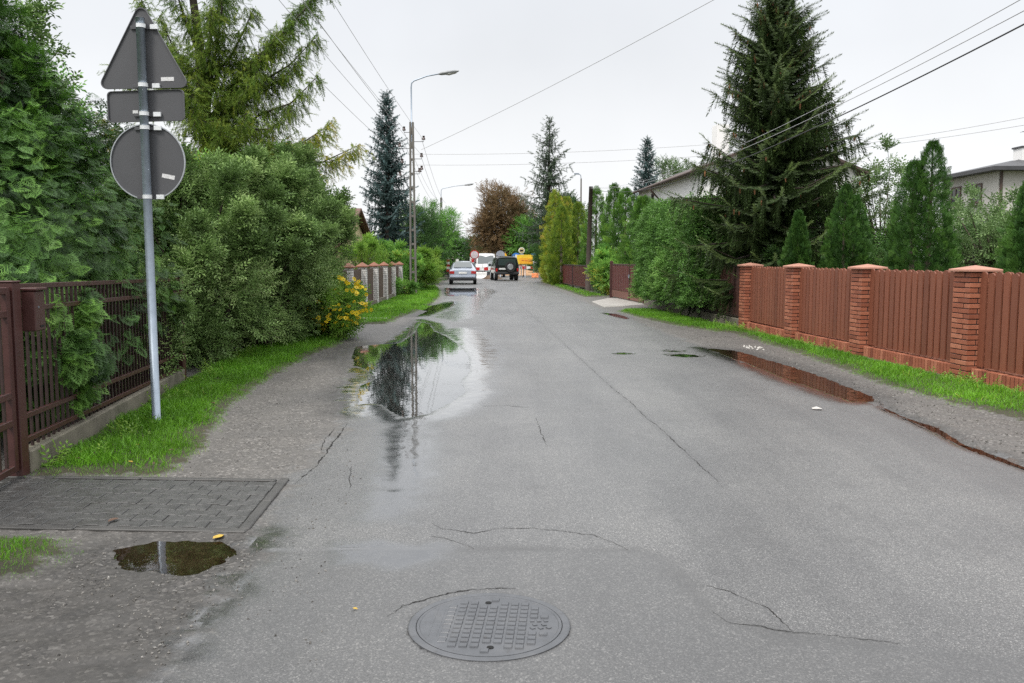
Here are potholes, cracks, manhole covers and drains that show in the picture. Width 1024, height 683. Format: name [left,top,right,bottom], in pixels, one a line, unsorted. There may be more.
crack [391,588,516,614]
crack [434,526,628,550]
crack [707,585,898,644]
crack [295,426,352,484]
manhole cover [408,593,570,662]
